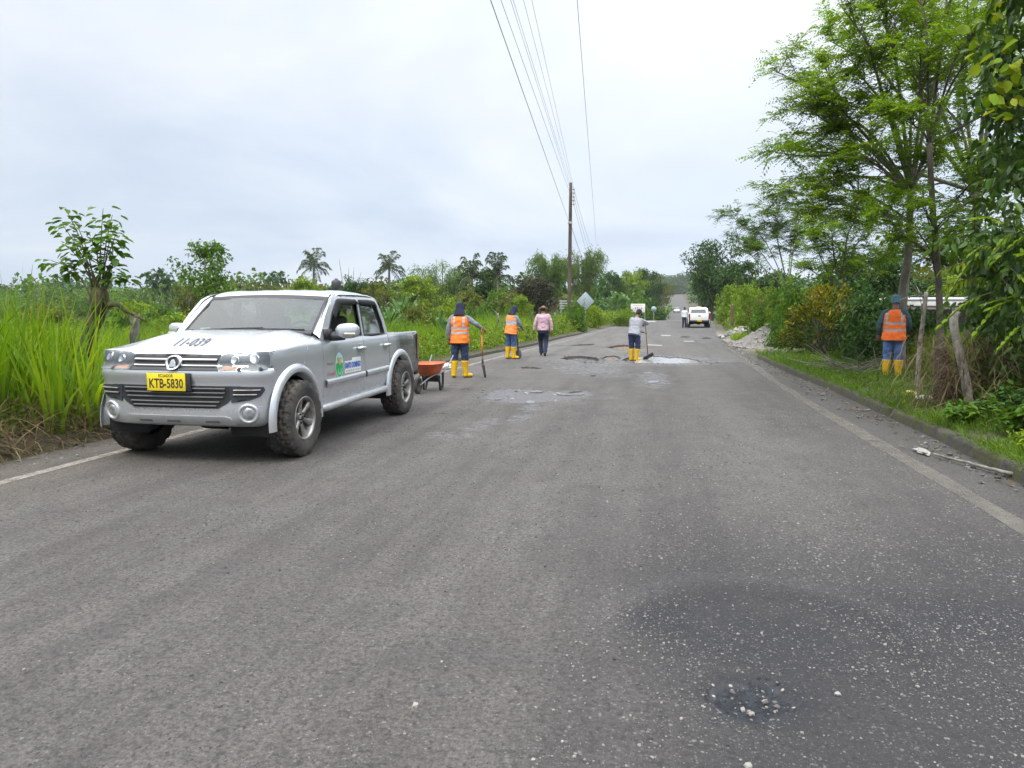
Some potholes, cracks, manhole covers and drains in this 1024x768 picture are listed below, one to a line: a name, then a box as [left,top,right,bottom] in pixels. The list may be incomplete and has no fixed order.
pothole [703,677,802,725]
